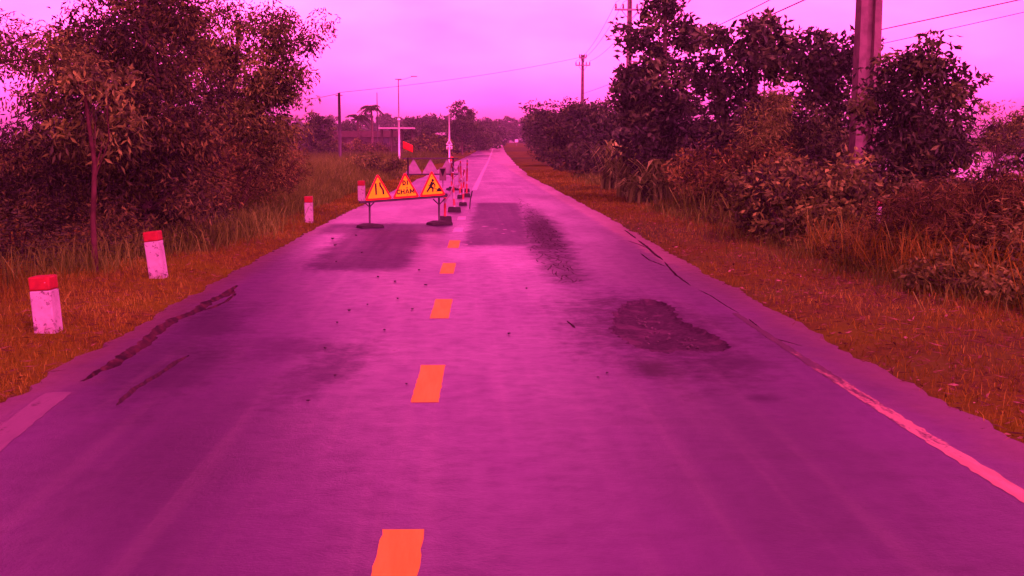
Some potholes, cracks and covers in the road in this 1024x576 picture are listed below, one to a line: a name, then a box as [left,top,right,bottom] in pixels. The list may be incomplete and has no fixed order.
crack [625,230,801,346]
pothole [608,299,731,354]
crack [82,285,238,405]
